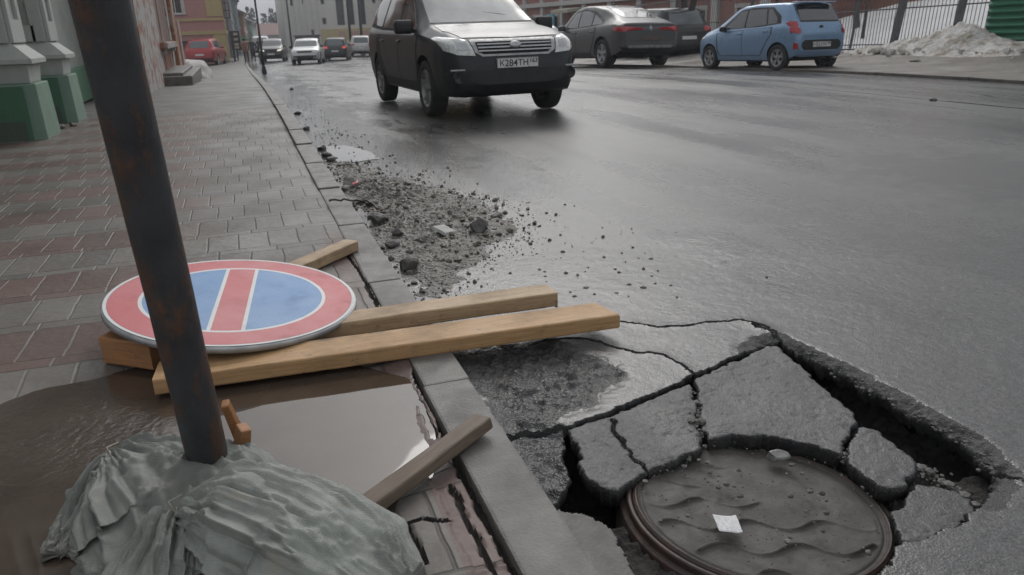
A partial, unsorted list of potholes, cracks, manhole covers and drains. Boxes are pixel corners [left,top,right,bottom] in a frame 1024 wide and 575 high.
crack [610,419,649,476]
crack [534,319,783,377]
crack [506,424,567,441]
manhole cover [615,443,895,575]
pothole [560,361,991,575]
